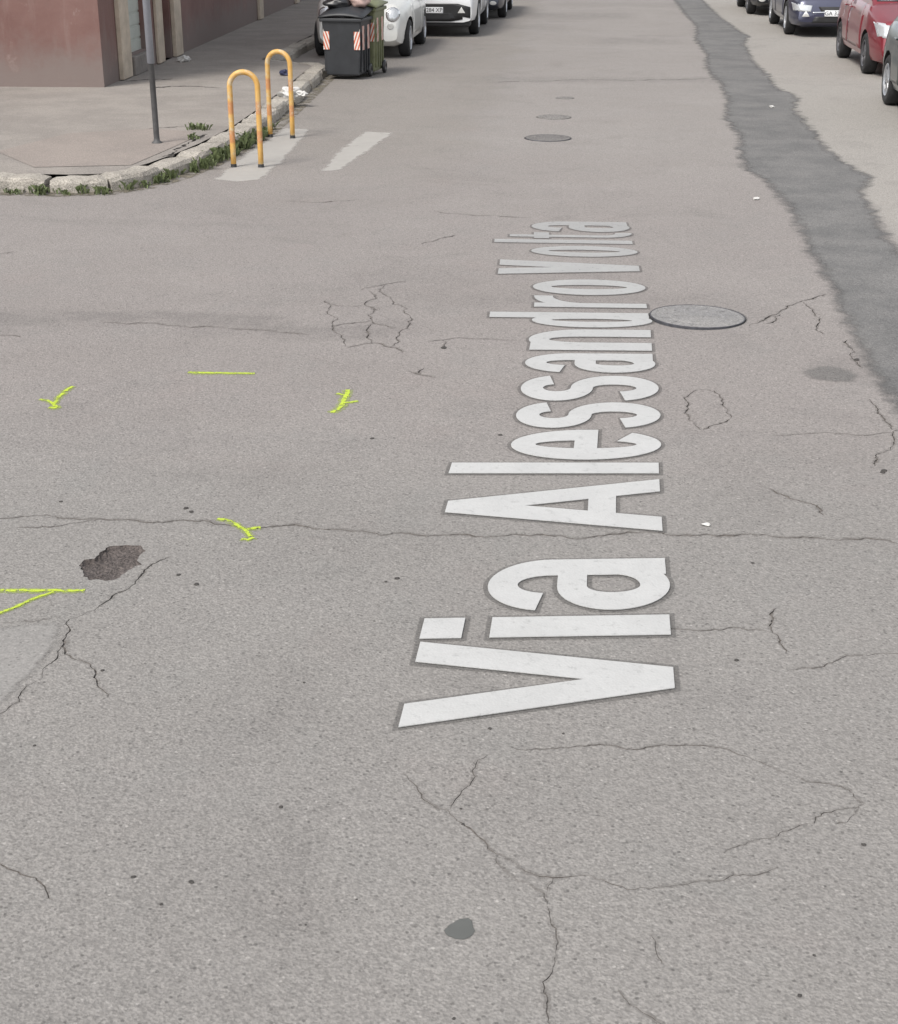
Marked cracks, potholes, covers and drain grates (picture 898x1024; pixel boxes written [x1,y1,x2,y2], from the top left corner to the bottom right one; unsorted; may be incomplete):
crack [0,863,52,900]
crack [402,757,775,1024]
crack [0,557,168,714]
manhole cover [524,134,572,142]
crack [749,294,826,334]
crack [512,744,861,853]
crack [0,515,898,544]
crack [324,282,435,378]
manhole cover [648,305,748,330]
pothole [79,545,146,581]
crack [670,608,898,671]
crack [684,389,732,431]
